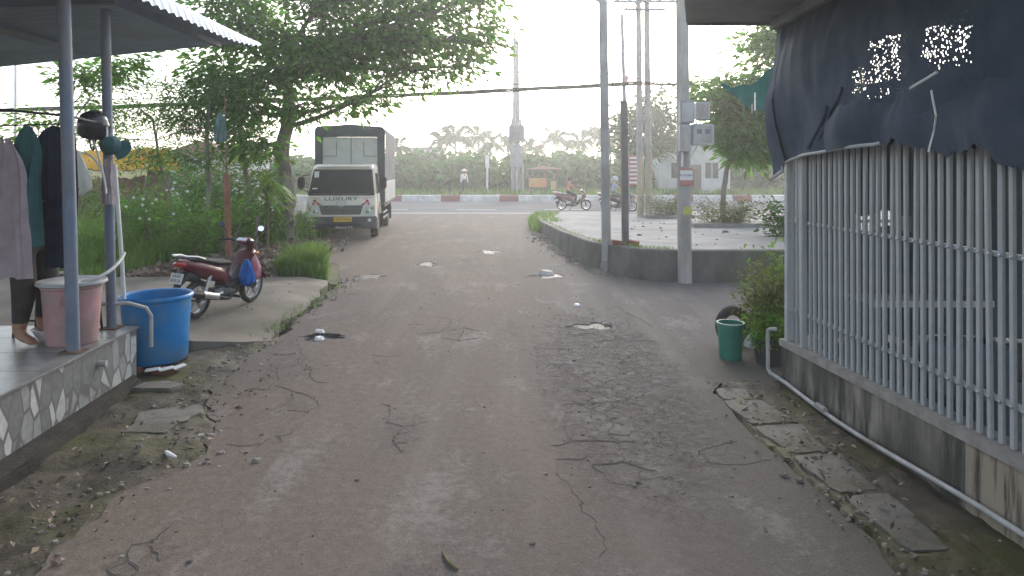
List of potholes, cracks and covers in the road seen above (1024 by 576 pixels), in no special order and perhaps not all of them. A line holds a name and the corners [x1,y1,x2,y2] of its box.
crack [107,522,176,576]
crack [700,439,771,466]
crack [534,306,664,557]
pothole [298,332,347,341]
crack [414,317,479,341]
crack [226,346,327,448]
pothole [559,321,616,330]
crack [382,403,425,451]
